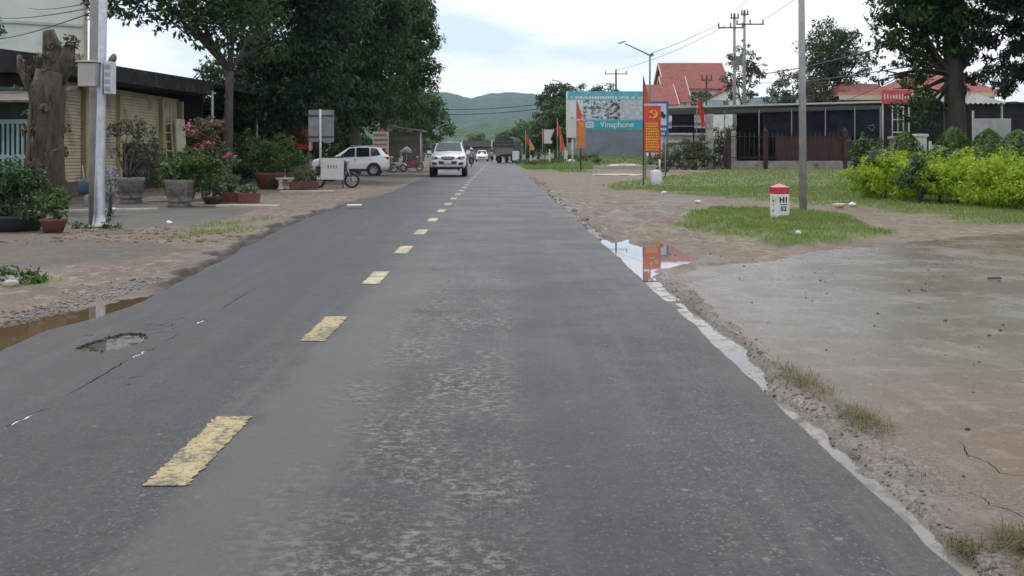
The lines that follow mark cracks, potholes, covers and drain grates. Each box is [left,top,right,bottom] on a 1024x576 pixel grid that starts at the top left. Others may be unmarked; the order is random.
crack [4,289,254,429]
pothole [76,332,148,352]
